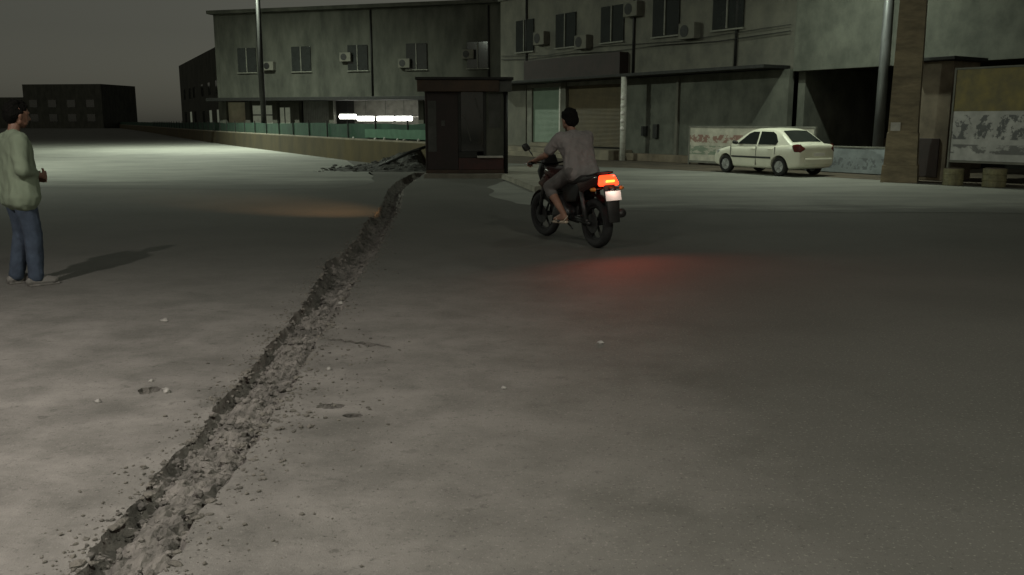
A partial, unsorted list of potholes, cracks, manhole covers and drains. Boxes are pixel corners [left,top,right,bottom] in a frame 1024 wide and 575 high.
crack [329,339,390,347]
